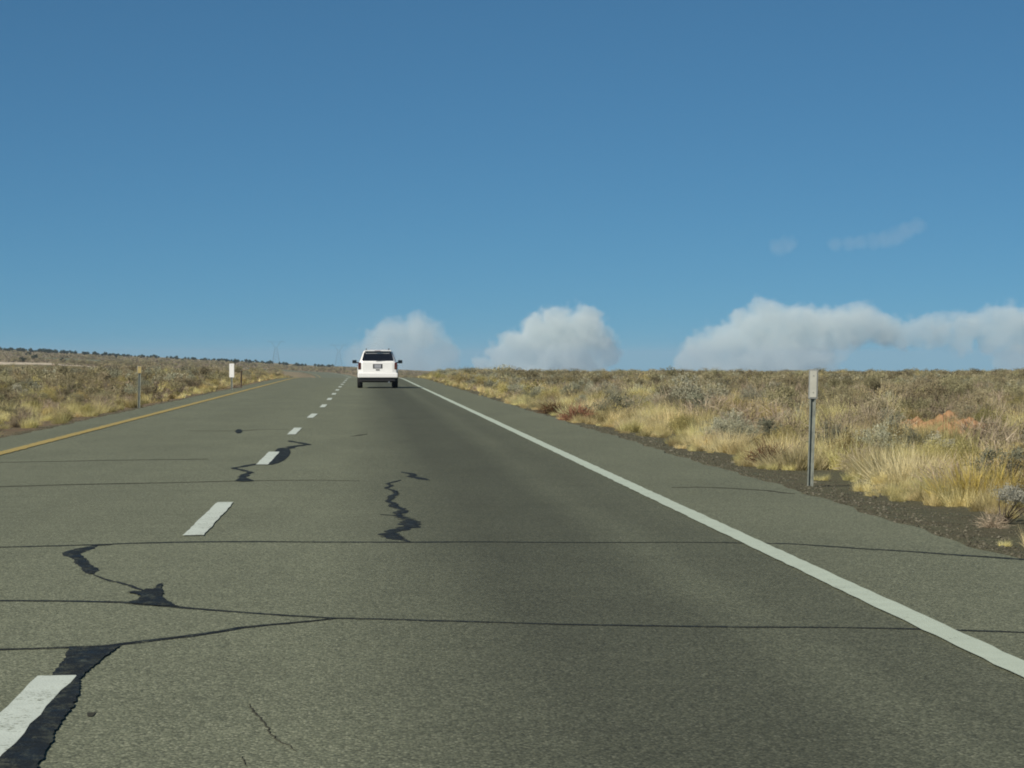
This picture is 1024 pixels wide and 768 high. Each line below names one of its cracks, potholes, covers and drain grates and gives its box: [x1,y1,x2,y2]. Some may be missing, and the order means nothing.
crack [0,429,356,487]
crack [241,704,297,766]
crack [401,472,429,480]
